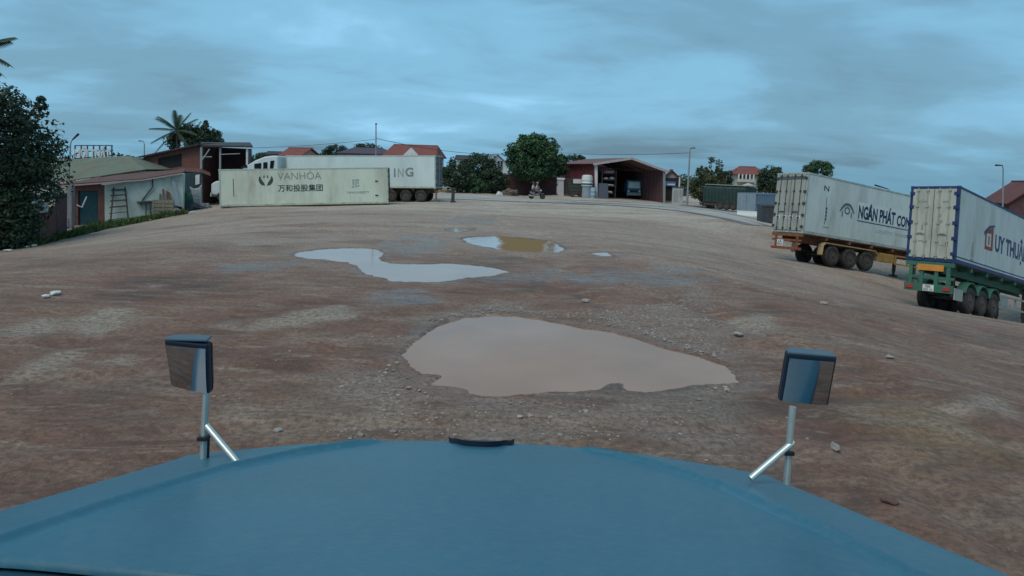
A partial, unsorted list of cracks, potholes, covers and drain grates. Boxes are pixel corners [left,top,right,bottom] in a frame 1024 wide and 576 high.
pothole [394,312,756,399]
pothole [460,235,567,253]
pothole [288,247,515,283]
